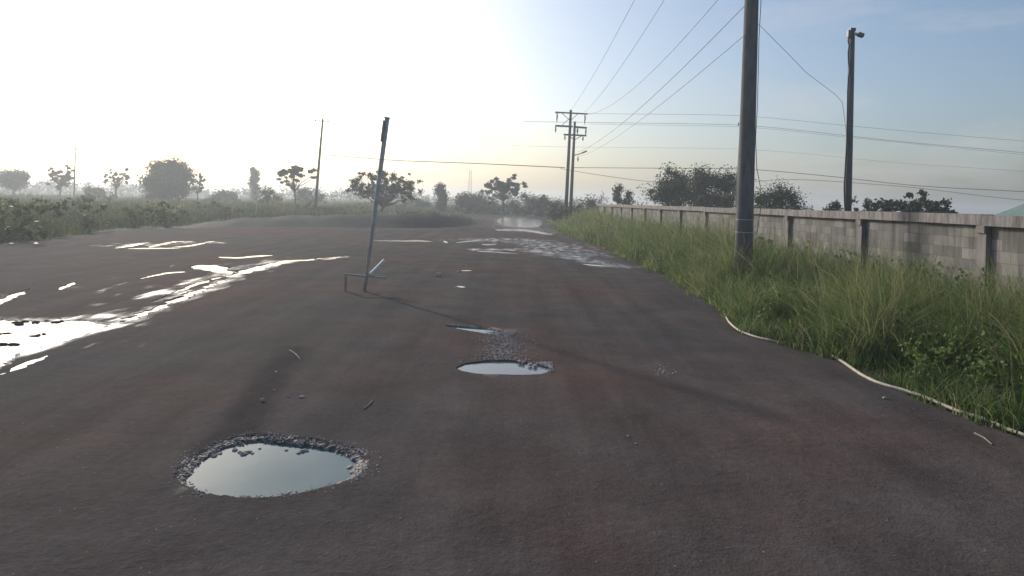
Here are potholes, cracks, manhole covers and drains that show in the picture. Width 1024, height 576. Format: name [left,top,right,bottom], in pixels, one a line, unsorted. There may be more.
pothole [444,325,509,334]
pothole [160,431,389,498]
pothole [456,329,554,375]
